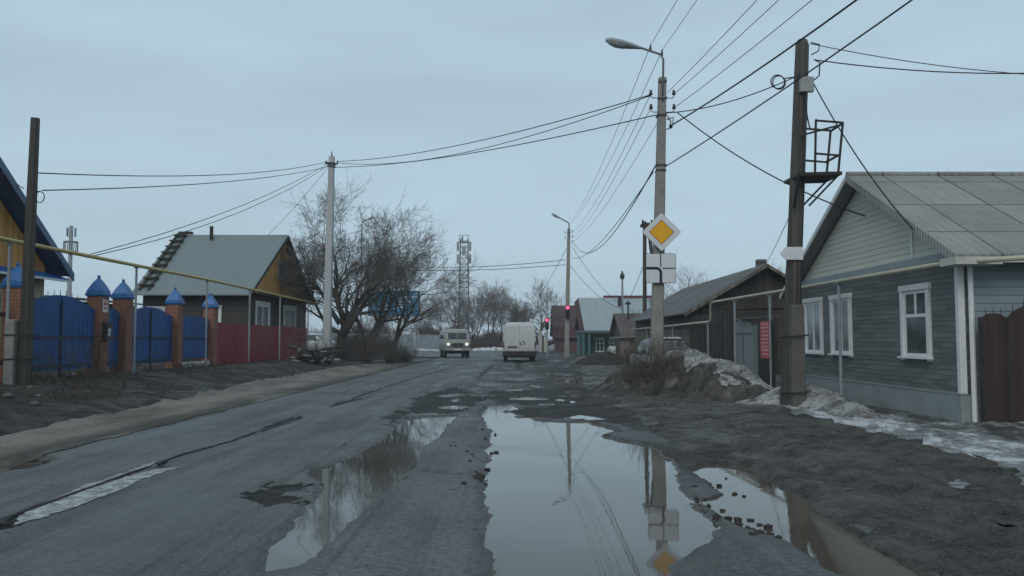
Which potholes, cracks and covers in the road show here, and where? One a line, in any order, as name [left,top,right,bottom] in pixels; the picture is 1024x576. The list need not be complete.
pothole [477,388,588,406]
pothole [477,404,728,576]
pothole [379,410,417,425]
pothole [408,387,488,414]
pothole [240,482,324,508]
pothole [255,414,459,571]
pothole [682,460,944,576]
